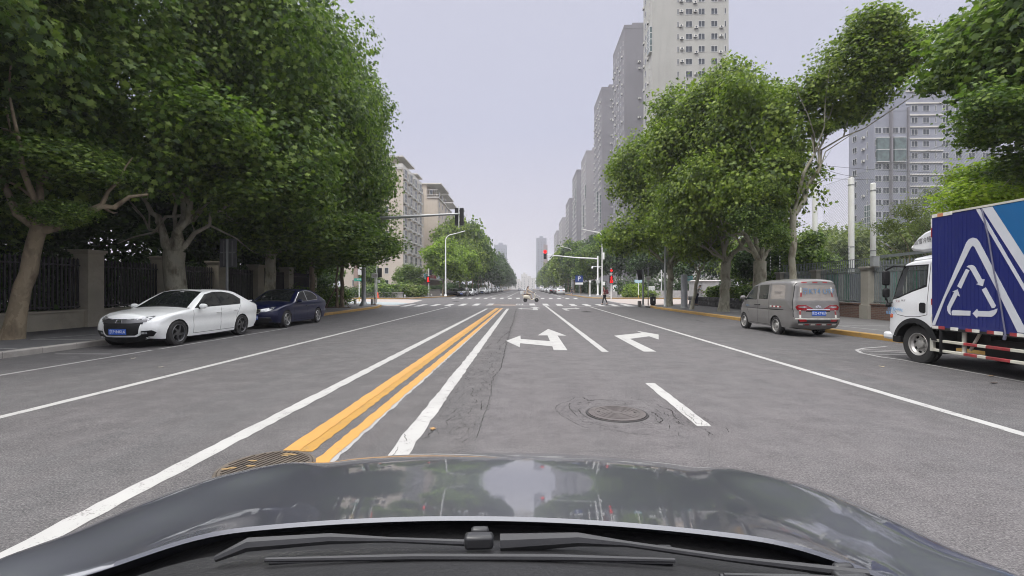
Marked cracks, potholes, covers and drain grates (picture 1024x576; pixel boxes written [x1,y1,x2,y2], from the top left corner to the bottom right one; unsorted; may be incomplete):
manhole cover [586,405,649,422]
crack [393,311,516,455]
crack [555,395,729,437]
